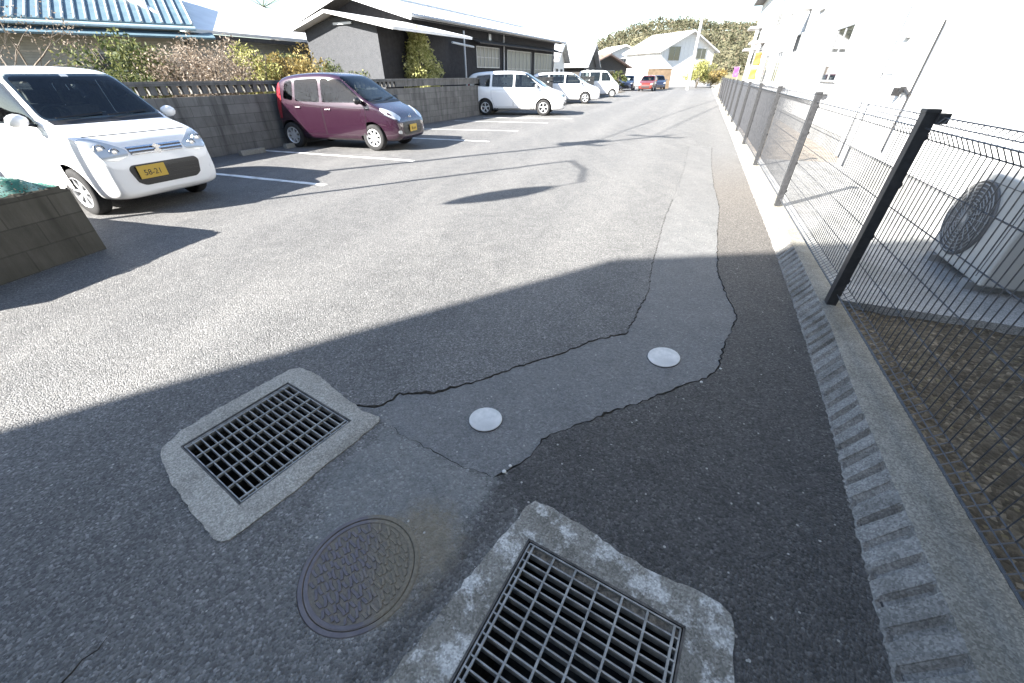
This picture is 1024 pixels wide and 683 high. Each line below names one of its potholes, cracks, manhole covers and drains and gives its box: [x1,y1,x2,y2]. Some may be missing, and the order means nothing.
crack [61,626,125,683]
manhole cover [296,515,420,639]
